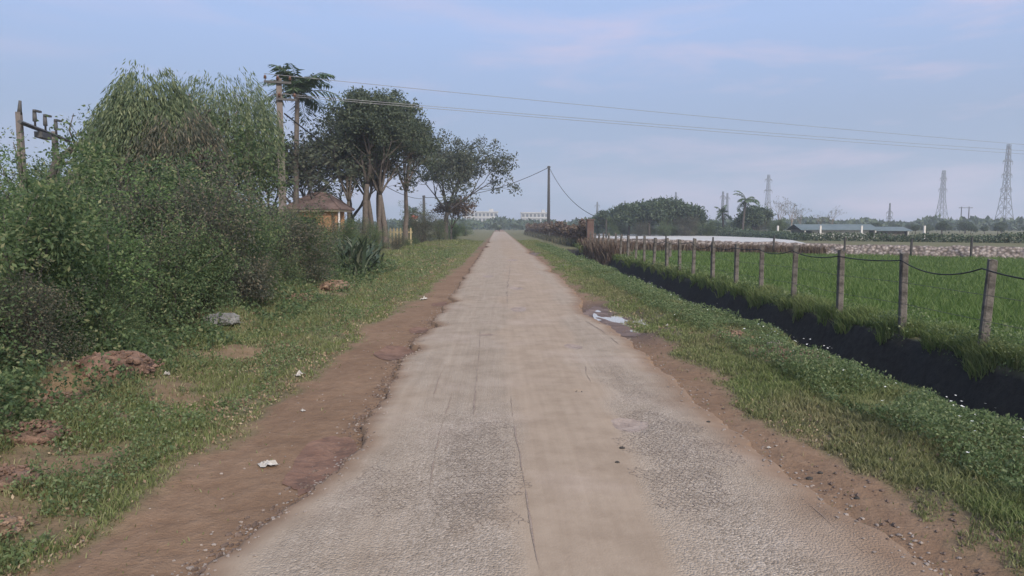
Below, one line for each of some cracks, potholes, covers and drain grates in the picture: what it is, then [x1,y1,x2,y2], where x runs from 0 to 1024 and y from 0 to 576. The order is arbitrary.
crack [473,332,481,414]
crack [345,367,531,536]
pothole [583,306,645,337]
